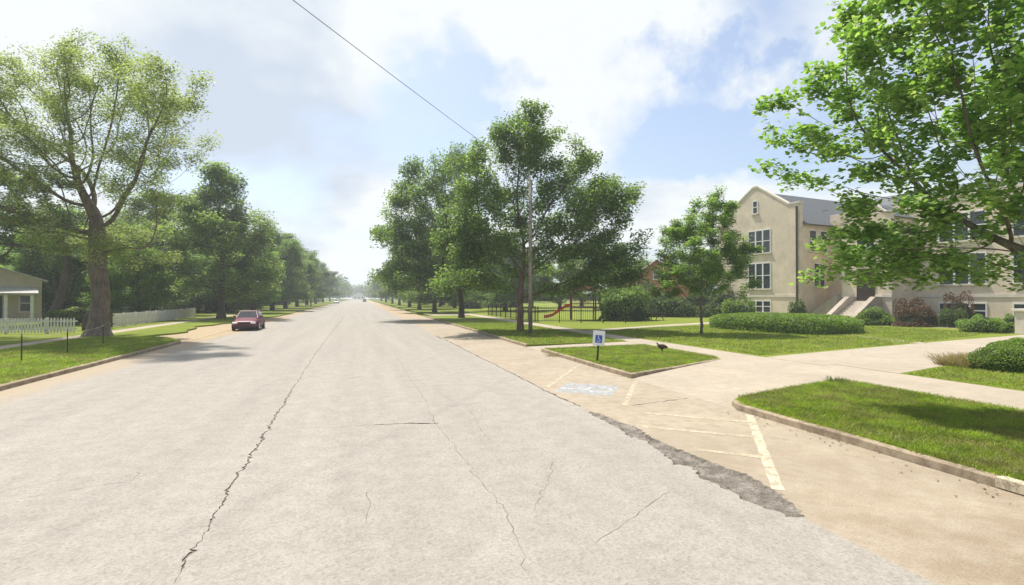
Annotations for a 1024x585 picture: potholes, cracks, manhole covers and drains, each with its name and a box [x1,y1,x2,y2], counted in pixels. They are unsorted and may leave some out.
crack [174,315,526,583]
pothole [585,410,805,517]
